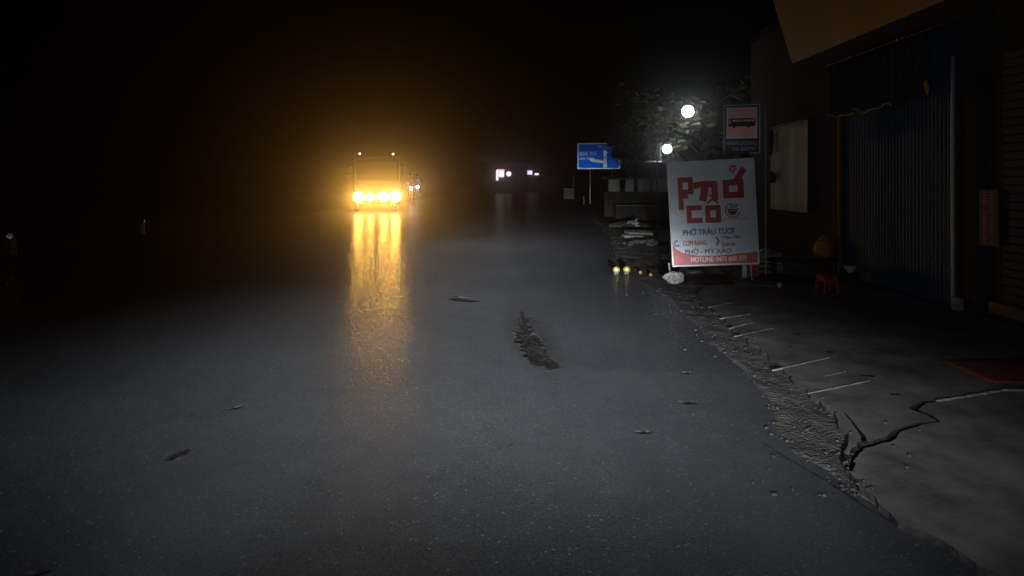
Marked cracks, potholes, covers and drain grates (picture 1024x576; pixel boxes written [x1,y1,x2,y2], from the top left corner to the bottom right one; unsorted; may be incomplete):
pothole [512,311,560,370]
pothole [164,449,192,461]
